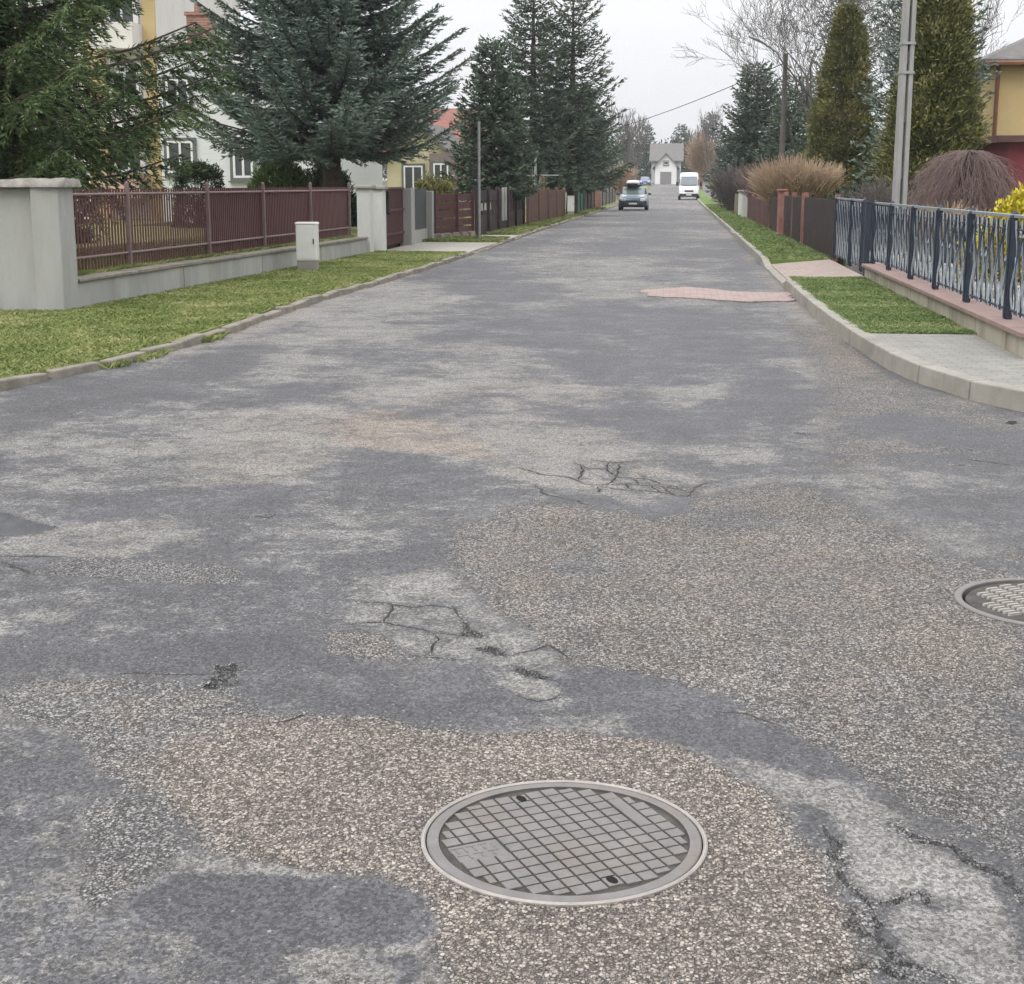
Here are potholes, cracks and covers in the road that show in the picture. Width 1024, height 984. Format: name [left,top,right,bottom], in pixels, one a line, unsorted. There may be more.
crack [514,694,561,702]
crack [808,824,1024,981]
crack [0,555,59,575]
crack [512,645,573,662]
pothole [202,663,240,690]
manhole cover [421,780,708,907]
crack [522,460,720,505]
manhole cover [954,578,1024,626]
crack [347,601,465,660]
